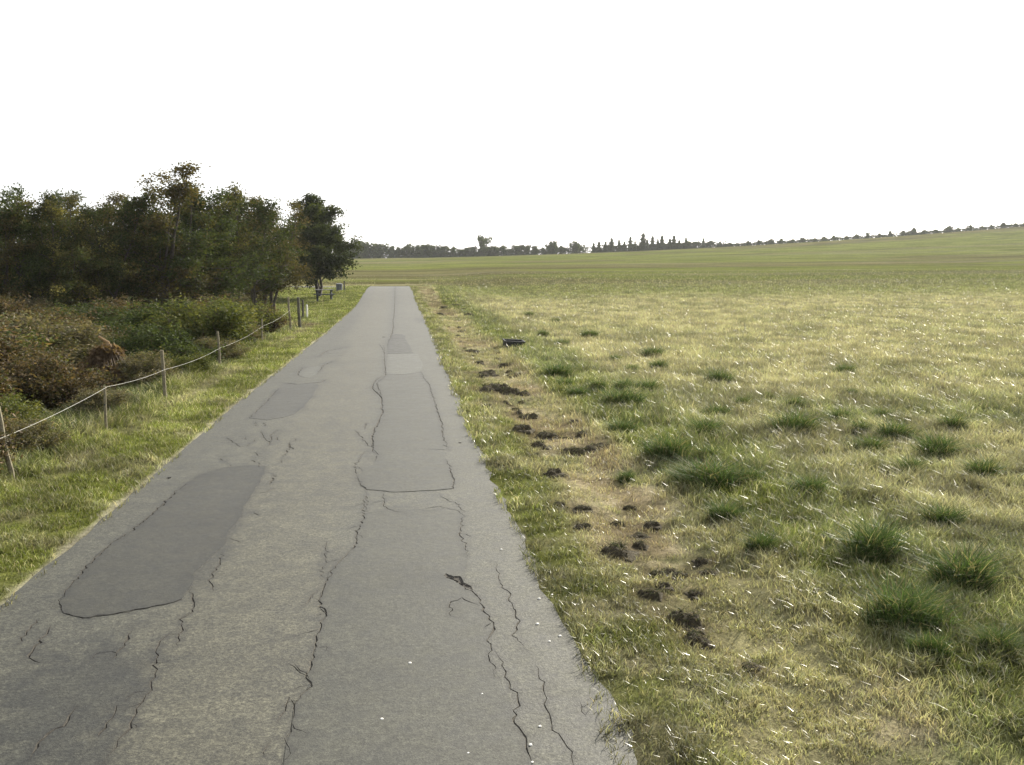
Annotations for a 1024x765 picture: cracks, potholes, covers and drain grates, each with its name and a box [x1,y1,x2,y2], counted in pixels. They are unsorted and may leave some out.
crack [29,705,78,760]
crack [263,345,586,765]
crack [58,488,239,764]
crack [20,620,50,663]
